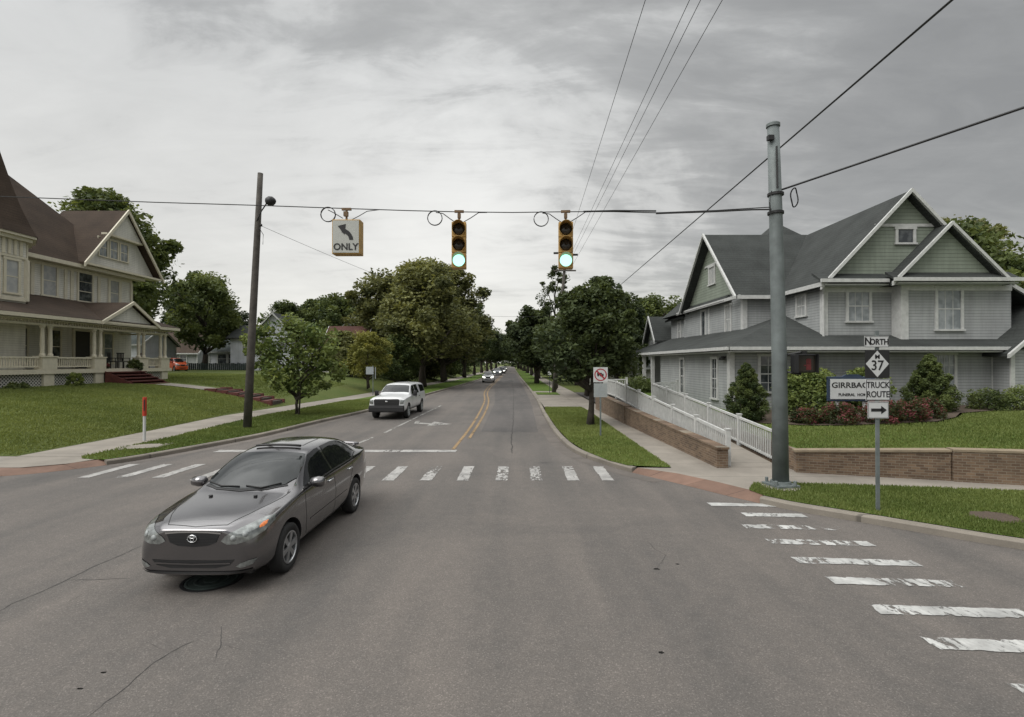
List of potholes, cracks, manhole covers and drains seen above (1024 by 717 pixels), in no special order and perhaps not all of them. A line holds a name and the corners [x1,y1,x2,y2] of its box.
crack [0,547,138,611]
crack [87,629,243,717]
manhole cover [179,573,244,592]
